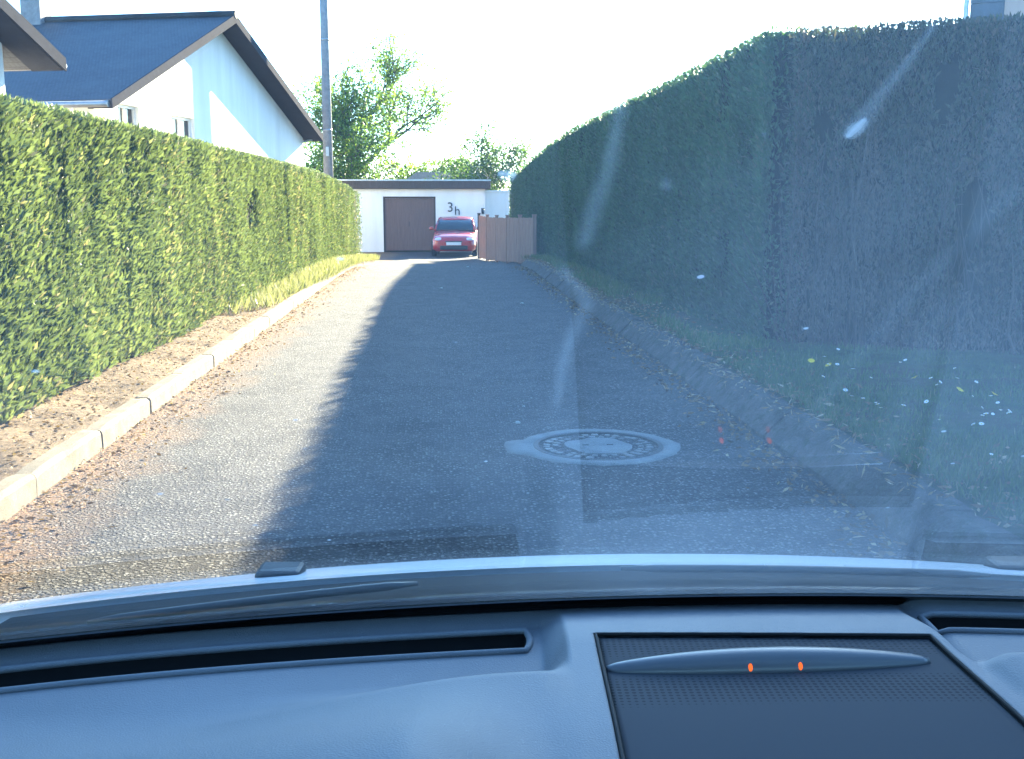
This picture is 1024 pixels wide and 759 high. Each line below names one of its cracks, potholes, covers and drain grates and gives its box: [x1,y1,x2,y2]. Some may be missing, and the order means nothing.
manhole cover [504,429,681,466]
